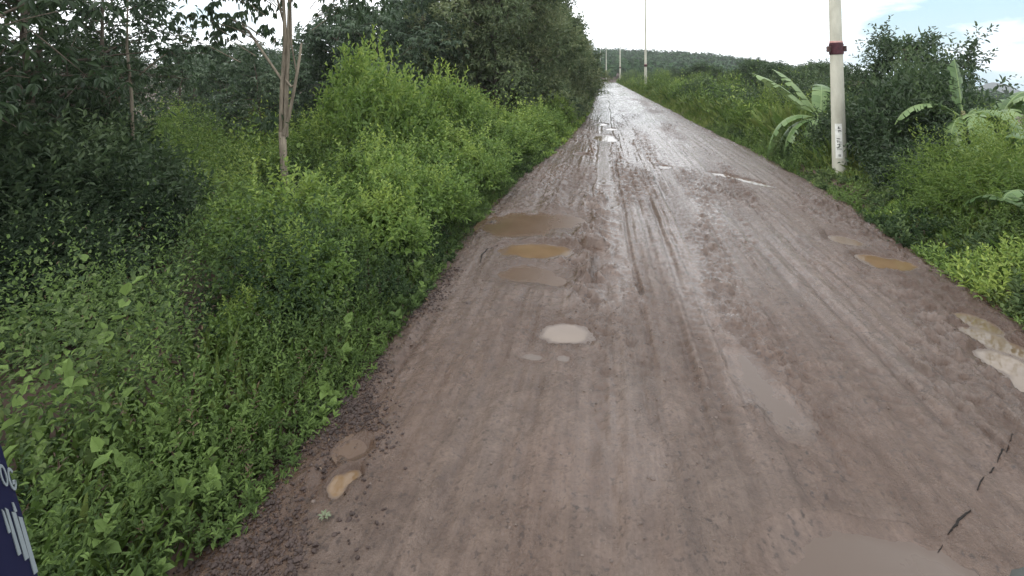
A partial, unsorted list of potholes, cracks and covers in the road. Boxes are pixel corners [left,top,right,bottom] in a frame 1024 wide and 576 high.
pothole [553,351,574,363]
pothole [533,319,597,347]
pothole [515,351,554,363]
pothole [483,256,587,289]
pothole [845,249,936,272]
pothole [817,229,876,249]
pothole [485,235,591,263]
crack [937,510,971,553]
pothole [473,204,601,245]
pothole [329,430,380,465]
pothole [322,461,366,502]
